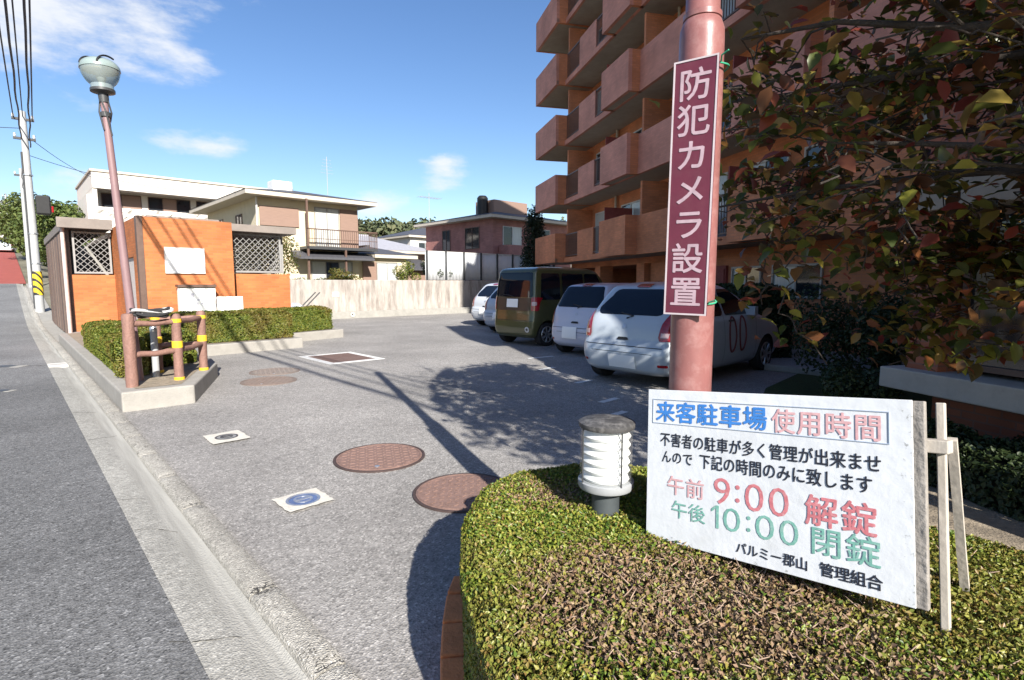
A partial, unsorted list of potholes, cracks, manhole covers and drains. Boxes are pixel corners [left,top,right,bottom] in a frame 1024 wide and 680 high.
manhole cover [412,473,500,513]
utility cover [203,430,250,444]
utility cover [272,488,334,512]
manhole cover [249,368,300,376]
manhole cover [298,352,385,364]
manhole cover [333,443,425,473]
manhole cover [240,376,297,386]
